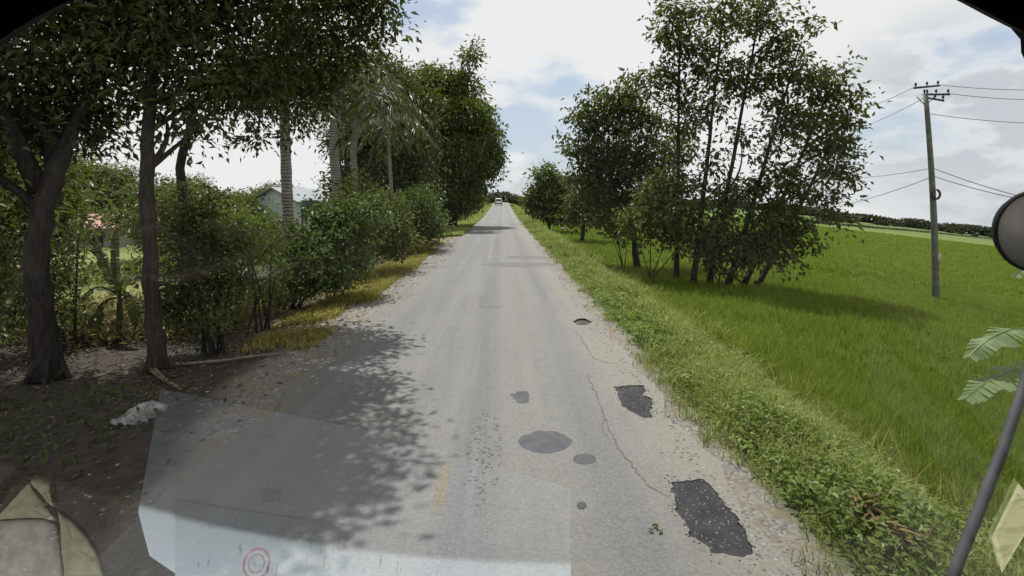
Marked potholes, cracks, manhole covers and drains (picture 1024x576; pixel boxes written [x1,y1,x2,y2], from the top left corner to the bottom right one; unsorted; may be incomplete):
crack [577,333,667,496]
